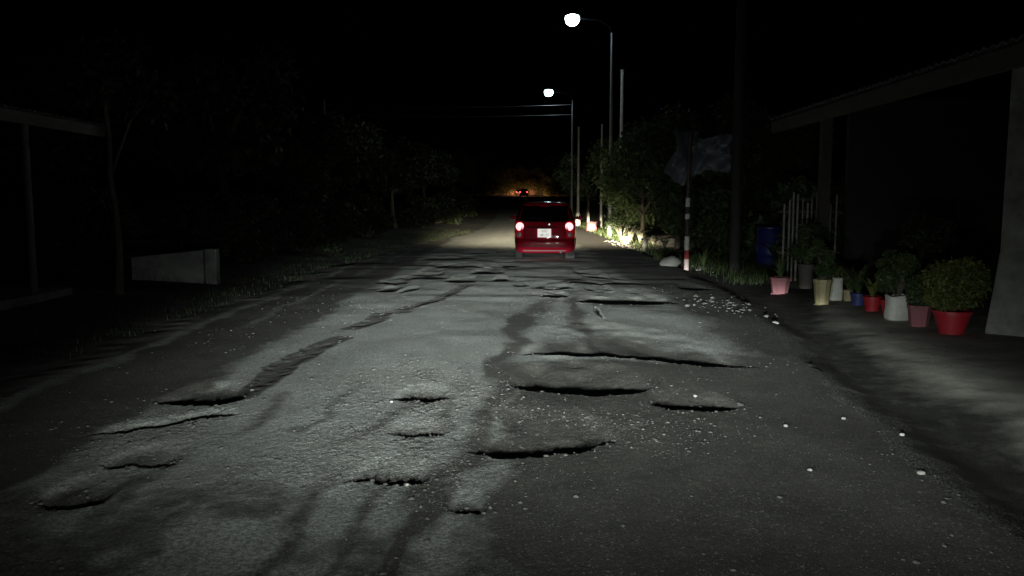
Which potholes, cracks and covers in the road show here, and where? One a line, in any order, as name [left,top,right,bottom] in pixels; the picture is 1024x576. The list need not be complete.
pothole [488,259,521,268]
pothole [339,449,435,488]
pothole [149,373,256,406]
pothole [442,274,478,283]
pothole [463,404,623,459]
pothole [28,457,154,511]
pothole [540,288,569,298]
pothole [428,260,486,269]
pothole [374,284,403,292]
pothole [396,283,422,293]
pothole [528,280,577,290]
pothole [384,416,453,439]
